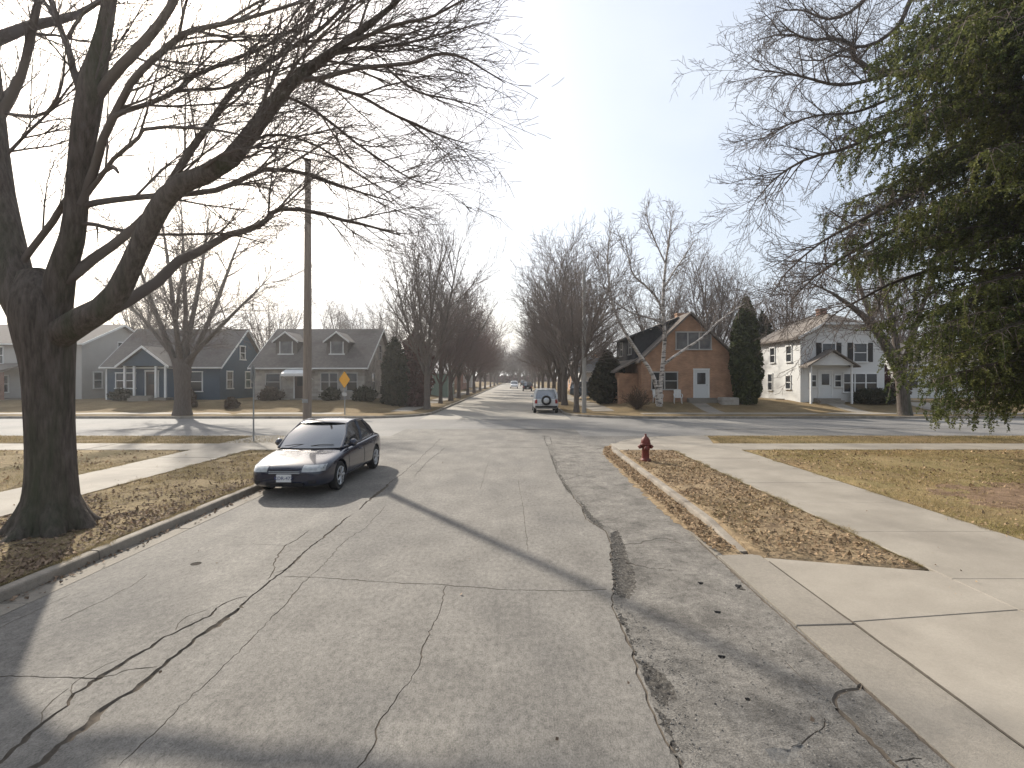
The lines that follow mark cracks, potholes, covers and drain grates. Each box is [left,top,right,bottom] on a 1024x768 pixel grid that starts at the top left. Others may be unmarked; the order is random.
crack [785,661,922,768]
crack [0,440,606,768]
pothole [609,530,637,599]
